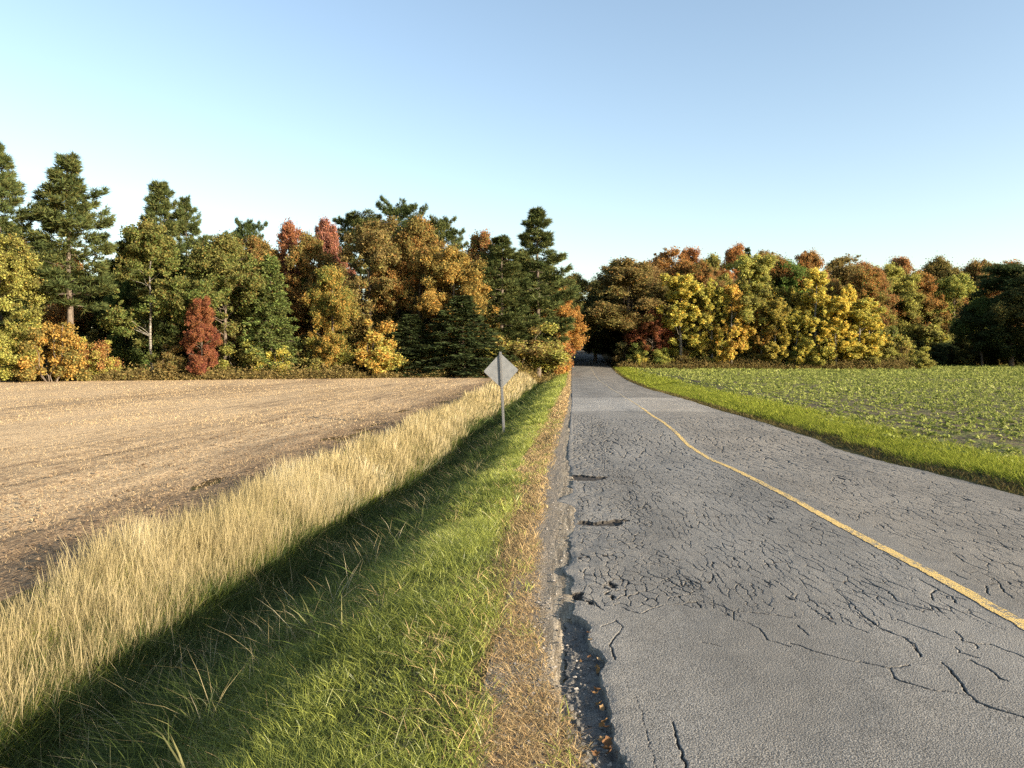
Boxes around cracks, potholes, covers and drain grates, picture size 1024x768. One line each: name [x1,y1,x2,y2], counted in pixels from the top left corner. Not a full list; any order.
pothole [558,615,629,768]
pothole [571,591,596,605]
pothole [574,519,630,527]
crack [569,409,1024,719]
crack [634,695,690,768]
